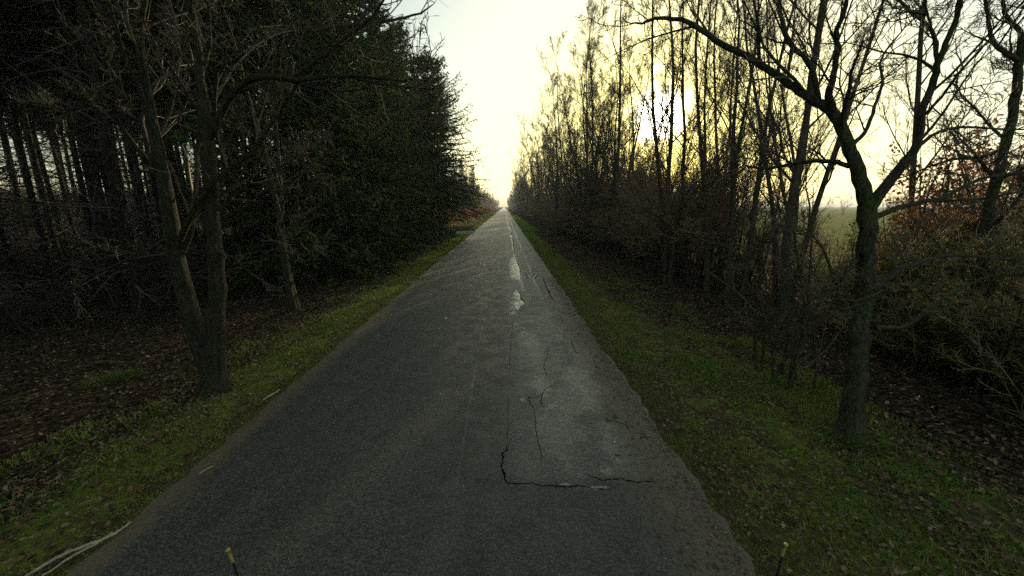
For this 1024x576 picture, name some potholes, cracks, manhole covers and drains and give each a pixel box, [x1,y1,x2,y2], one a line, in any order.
crack [500,347,655,490]
